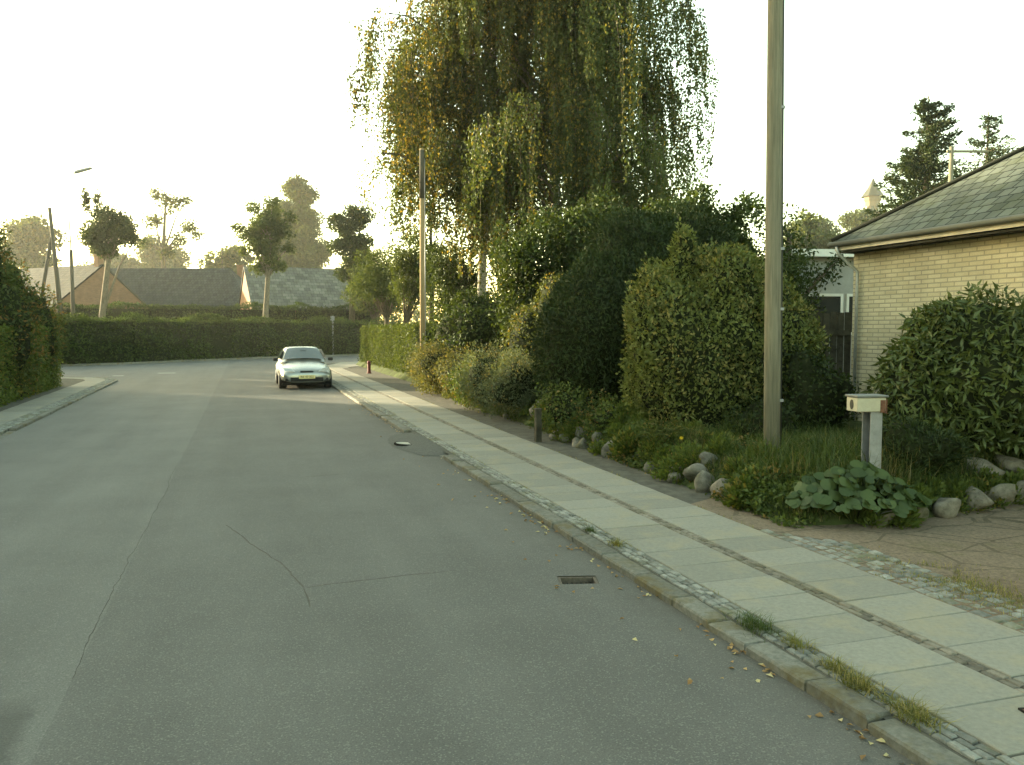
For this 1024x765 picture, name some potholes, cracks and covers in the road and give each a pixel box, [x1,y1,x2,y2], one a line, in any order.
crack [226,525,455,607]
drain grate [557,576,599,584]
